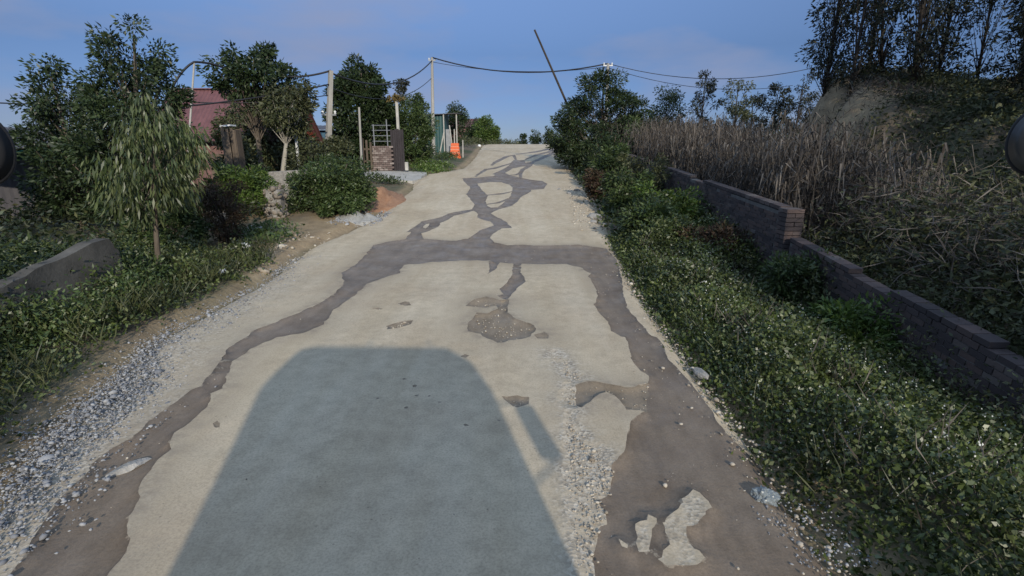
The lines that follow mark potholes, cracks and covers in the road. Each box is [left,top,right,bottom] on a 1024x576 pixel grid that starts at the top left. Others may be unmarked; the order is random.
pothole [502,395,529,408]
pothole [466,296,536,343]
pothole [386,320,413,329]
